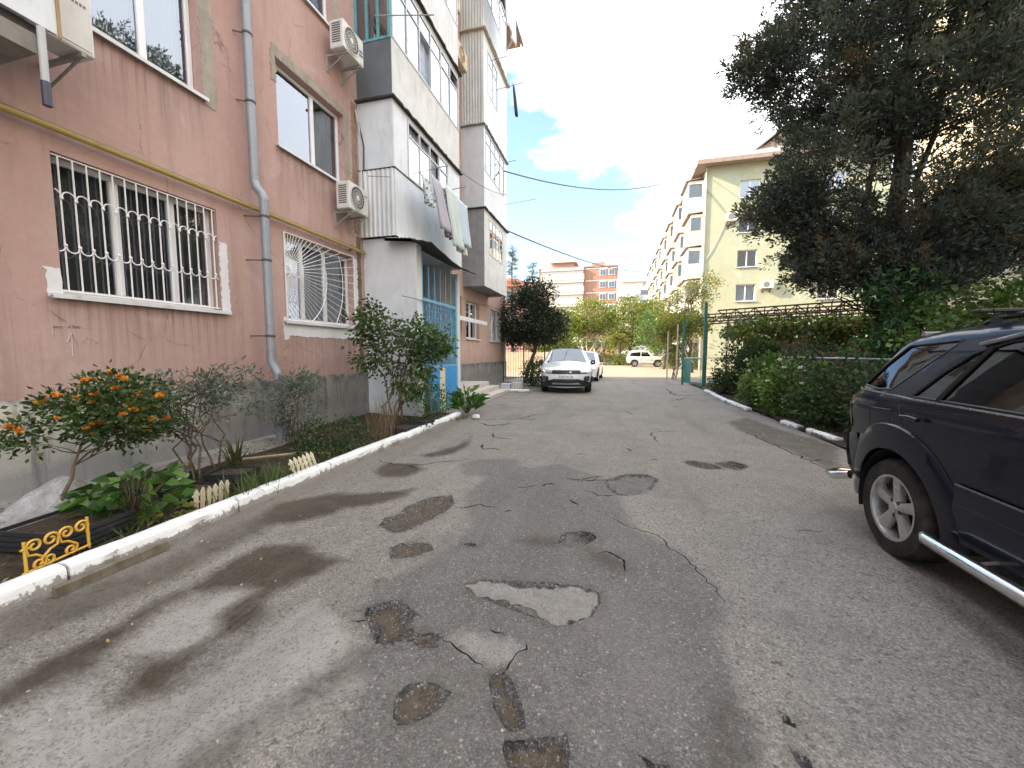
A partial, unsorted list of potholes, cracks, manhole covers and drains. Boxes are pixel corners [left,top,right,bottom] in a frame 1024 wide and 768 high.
pothole [380,495,454,533]
pothole [605,474,658,496]
pothole [715,461,748,470]
pothole [502,733,571,768]
crack [569,476,612,505]
pothole [389,543,434,558]
crack [443,630,528,673]
pothole [488,668,526,735]
pothole [462,579,601,626]
crack [605,514,725,604]
pothole [364,599,444,648]
pothole [393,681,452,726]
